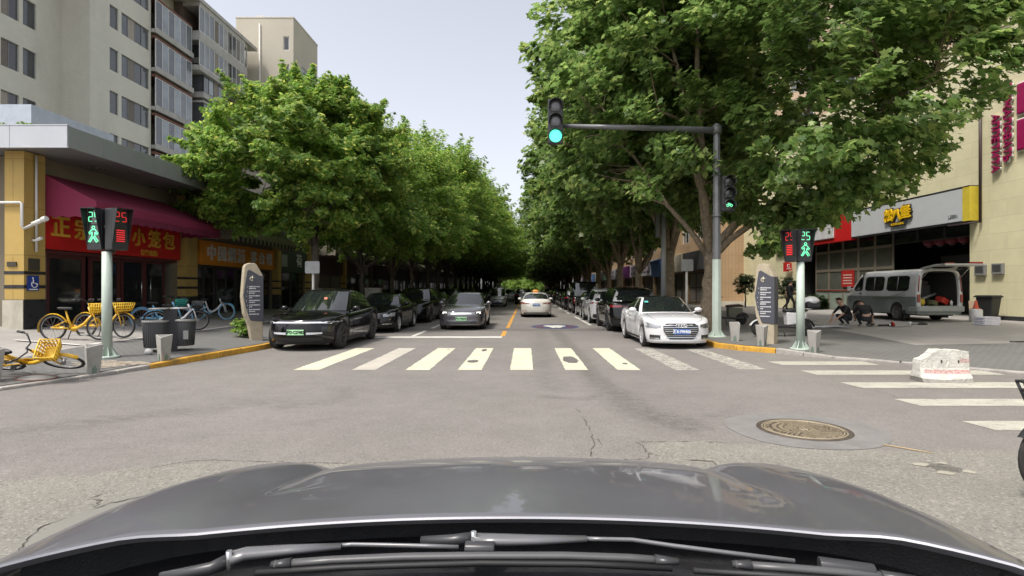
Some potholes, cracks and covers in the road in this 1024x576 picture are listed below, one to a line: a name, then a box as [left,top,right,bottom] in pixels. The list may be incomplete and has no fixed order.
manhole cover [723,414,892,450]
crack [18,494,147,550]
